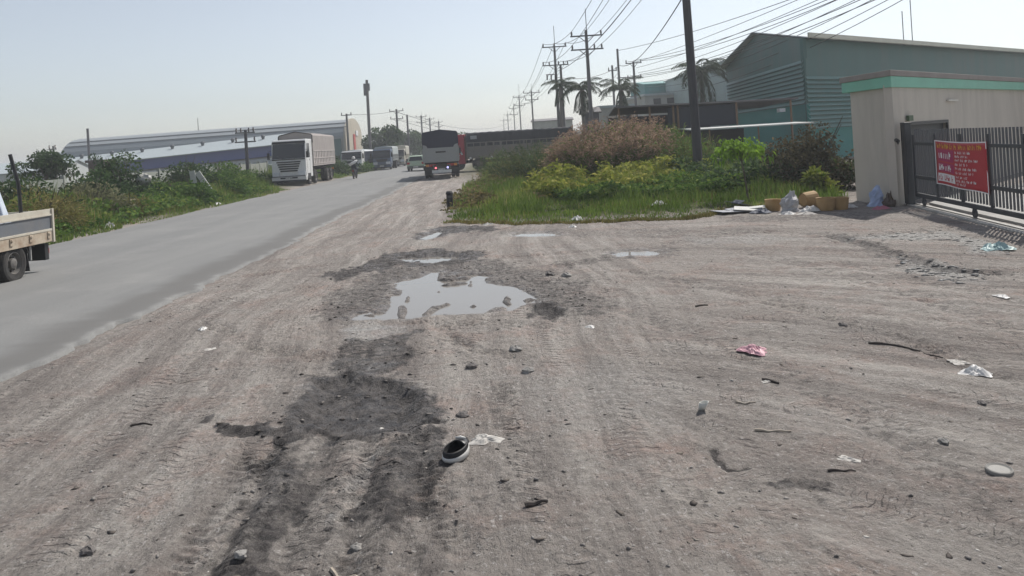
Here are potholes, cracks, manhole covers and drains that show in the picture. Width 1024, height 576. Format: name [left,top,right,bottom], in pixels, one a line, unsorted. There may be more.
pothole [325,267,559,325]
pothole [386,251,478,266]
pothole [594,246,679,259]
pothole [500,230,575,238]
